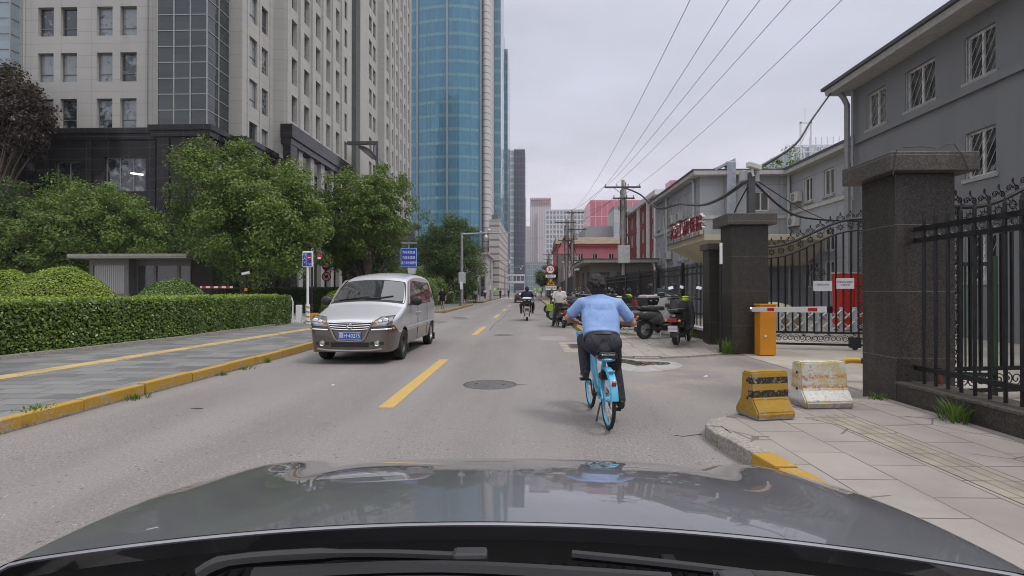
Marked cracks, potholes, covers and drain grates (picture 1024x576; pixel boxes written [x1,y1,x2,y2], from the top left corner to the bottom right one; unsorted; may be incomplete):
pothole [598,358,682,372]
manhole cover [463,380,517,390]
